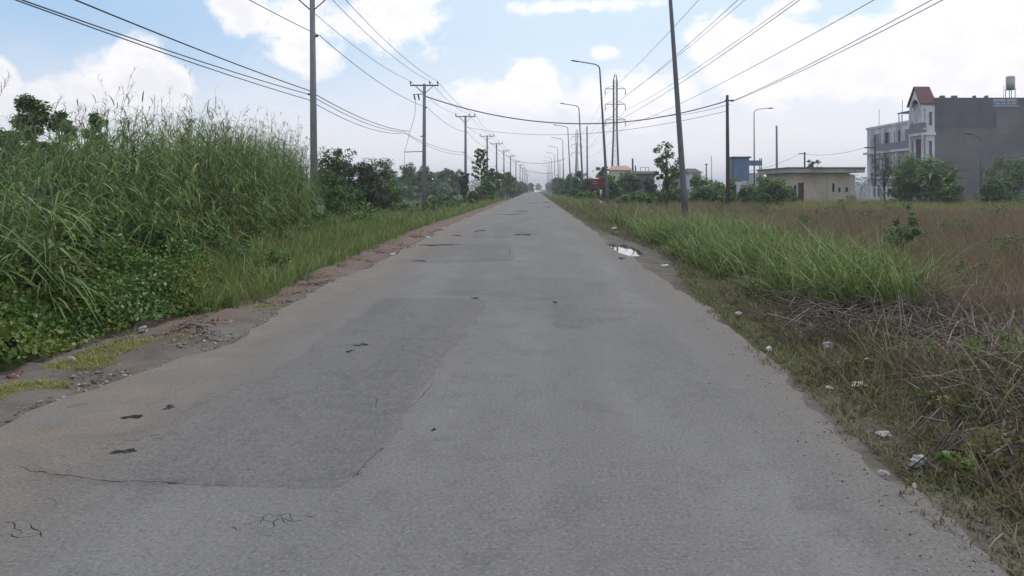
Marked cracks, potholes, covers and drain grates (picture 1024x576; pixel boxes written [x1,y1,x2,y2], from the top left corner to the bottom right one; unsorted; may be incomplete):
crack [2,498,314,538]
crack [20,466,229,487]
